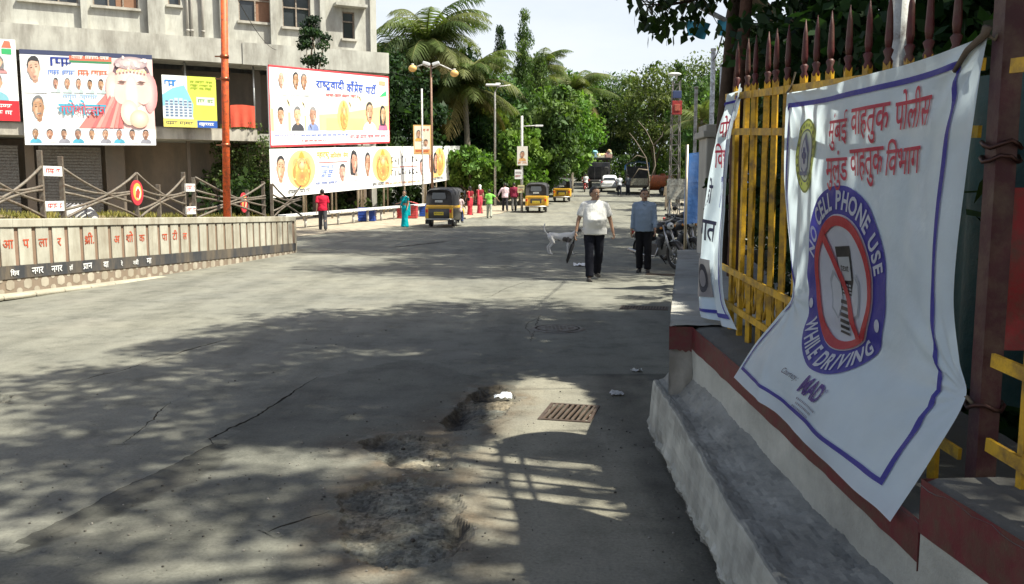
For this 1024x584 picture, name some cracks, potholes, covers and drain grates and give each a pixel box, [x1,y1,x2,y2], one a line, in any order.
crack [255,508,346,538]
pothole [338,429,482,478]
drain grate [537,402,600,423]
manhole cover [530,324,585,333]
pothole [419,383,538,436]
pothole [300,473,499,584]
crack [21,335,245,445]
